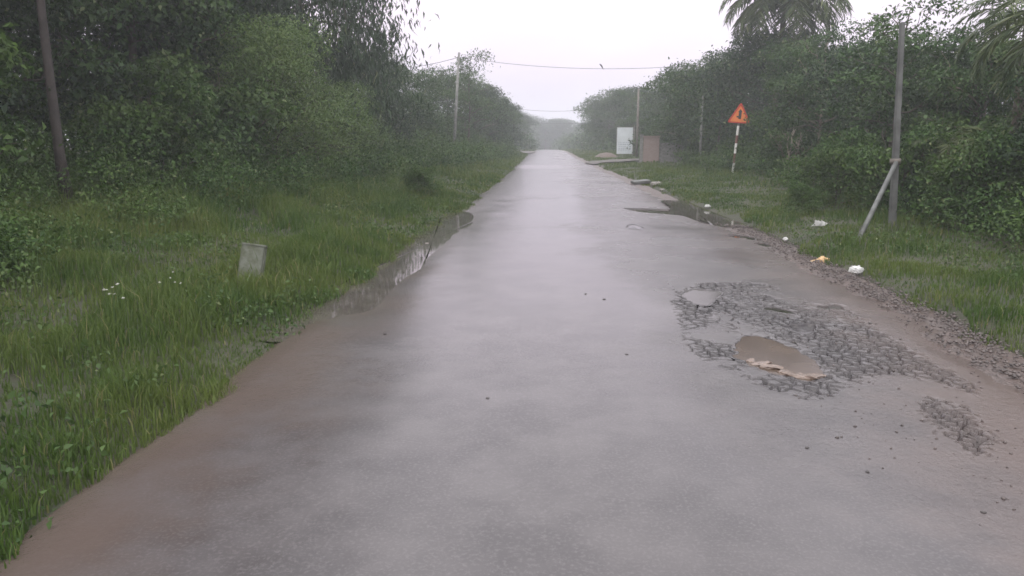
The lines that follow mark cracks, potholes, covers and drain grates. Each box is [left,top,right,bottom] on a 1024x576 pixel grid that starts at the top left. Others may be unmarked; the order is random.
crack [656,281,1015,465]
pothole [677,288,723,307]
pothole [731,335,827,384]
pothole [624,206,700,222]
